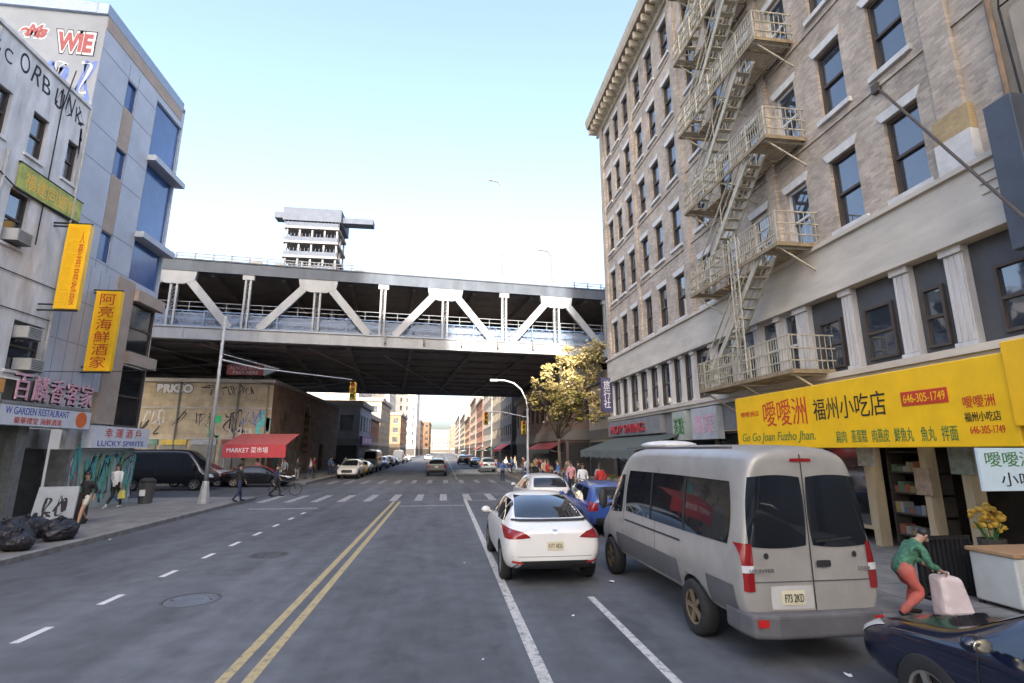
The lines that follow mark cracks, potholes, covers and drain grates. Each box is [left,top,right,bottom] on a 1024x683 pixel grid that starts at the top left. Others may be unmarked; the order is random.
manhole cover [247,551,290,559]
manhole cover [159,592,223,608]
